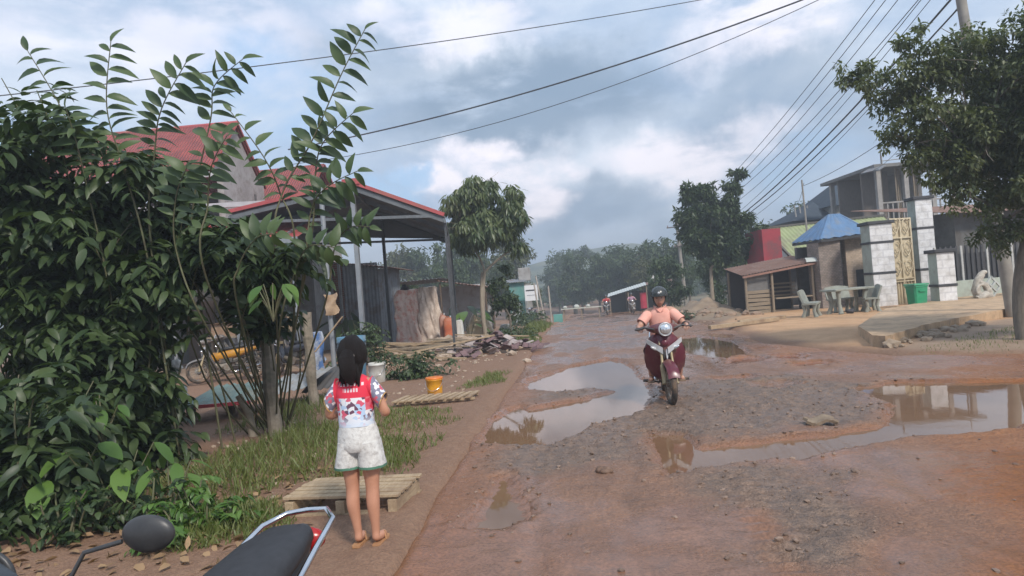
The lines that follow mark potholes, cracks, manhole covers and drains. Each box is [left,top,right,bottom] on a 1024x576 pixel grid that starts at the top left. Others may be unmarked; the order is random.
pothole [677,335,752,358]
pothole [641,379,1024,477]
pothole [476,358,656,445]
pothole [462,469,532,529]
